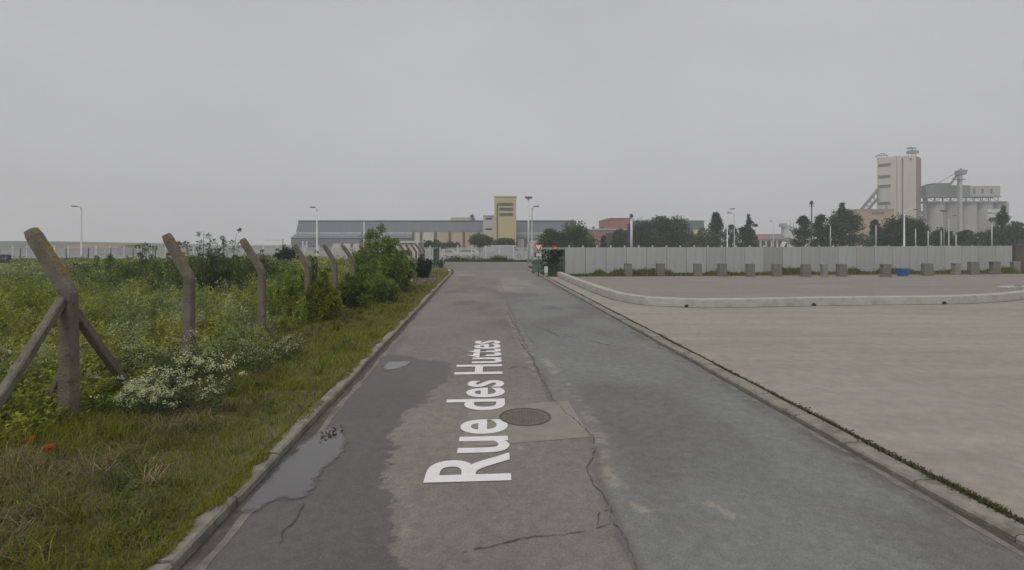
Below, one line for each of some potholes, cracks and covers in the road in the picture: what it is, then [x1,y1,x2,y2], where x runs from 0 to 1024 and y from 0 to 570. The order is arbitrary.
crack [463,309,637,570]
manhole cover [499,408,551,426]
